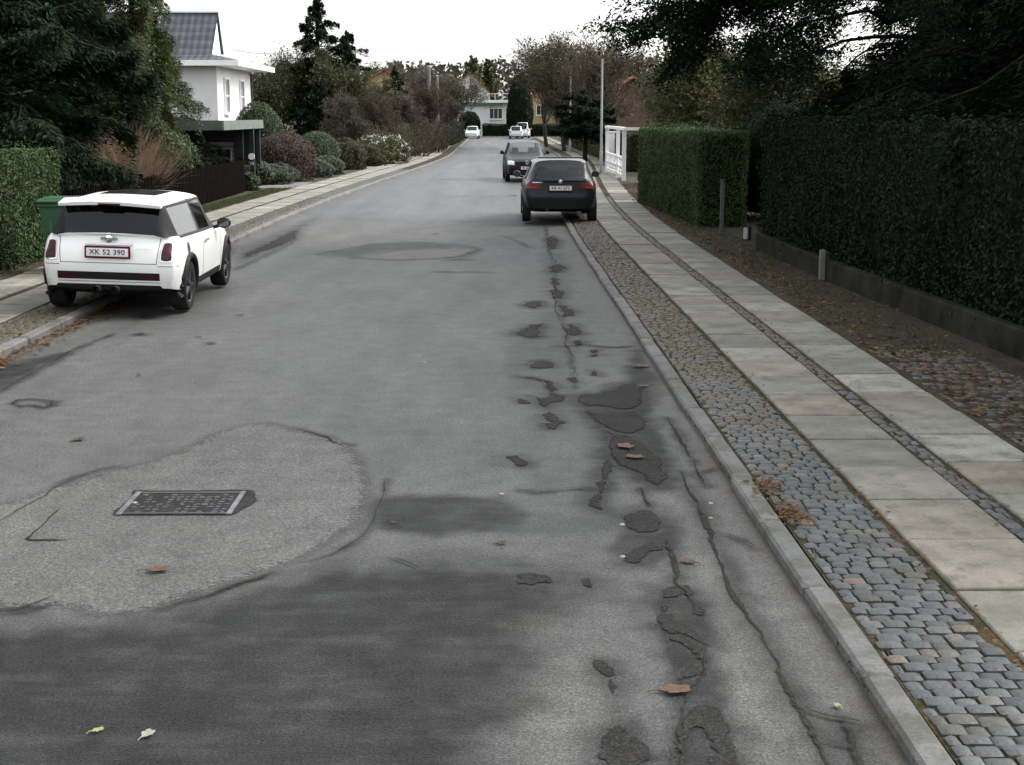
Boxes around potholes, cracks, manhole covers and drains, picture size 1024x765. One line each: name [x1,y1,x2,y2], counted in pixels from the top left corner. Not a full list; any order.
pothole [607,431,668,485]
pothole [624,510,661,532]
pothole [506,455,528,466]
manhole cover [115,491,246,515]
pothole [577,383,643,409]
pothole [598,725,650,765]
pothole [516,573,552,585]
crack [1,467,109,540]
pothole [586,411,646,433]
crack [666,418,874,765]
pothole [593,660,617,692]
